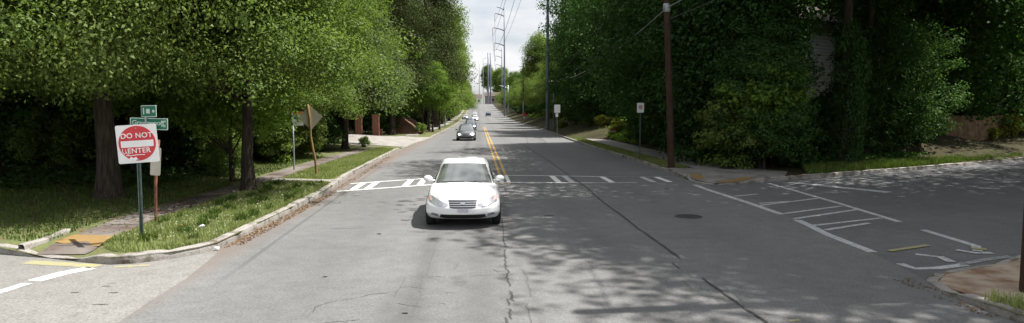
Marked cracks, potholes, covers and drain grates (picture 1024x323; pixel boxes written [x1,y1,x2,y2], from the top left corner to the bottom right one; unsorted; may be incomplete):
crack [475,219,532,323]
